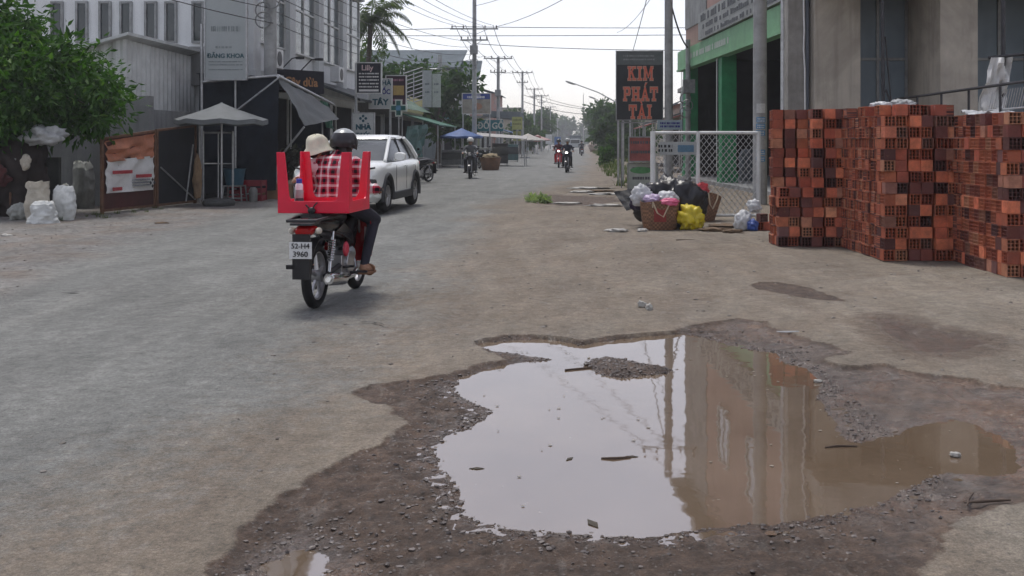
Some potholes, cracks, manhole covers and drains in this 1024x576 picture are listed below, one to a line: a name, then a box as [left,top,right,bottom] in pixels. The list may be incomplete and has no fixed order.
pothole [197,318,1024,576]
